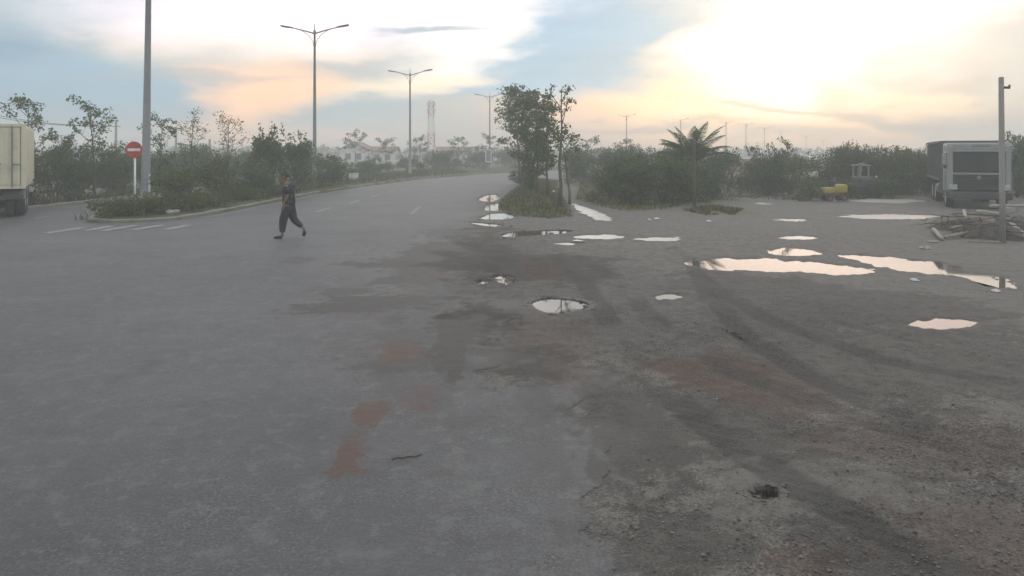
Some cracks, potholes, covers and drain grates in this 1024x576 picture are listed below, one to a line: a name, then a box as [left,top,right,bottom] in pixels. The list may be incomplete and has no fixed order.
pothole [523,295,599,315]
pothole [490,228,571,239]
pothole [743,481,789,503]
pothole [491,273,516,285]
